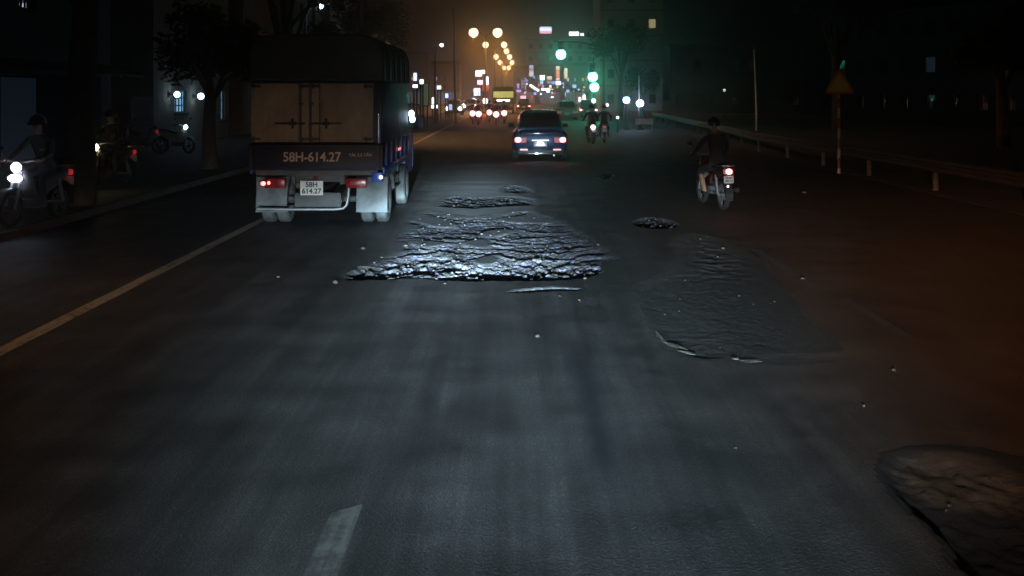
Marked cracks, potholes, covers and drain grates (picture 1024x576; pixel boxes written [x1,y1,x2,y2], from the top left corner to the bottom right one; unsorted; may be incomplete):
pothole [631,233,845,366]
pothole [497,185,534,194]
pothole [629,217,683,229]
pothole [432,195,540,209]
pothole [872,444,1024,576]
pothole [341,210,621,282]
